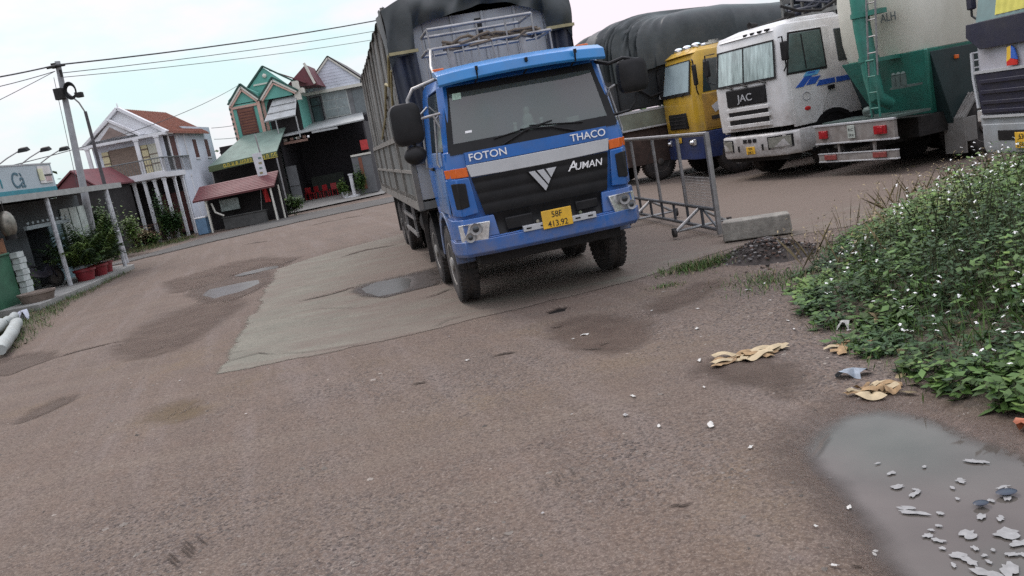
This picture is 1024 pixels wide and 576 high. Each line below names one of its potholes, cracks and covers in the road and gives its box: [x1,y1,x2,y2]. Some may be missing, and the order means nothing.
pothole [784,399,1024,576]
pothole [188,271,269,303]
pothole [355,267,442,297]
pothole [169,258,294,292]
